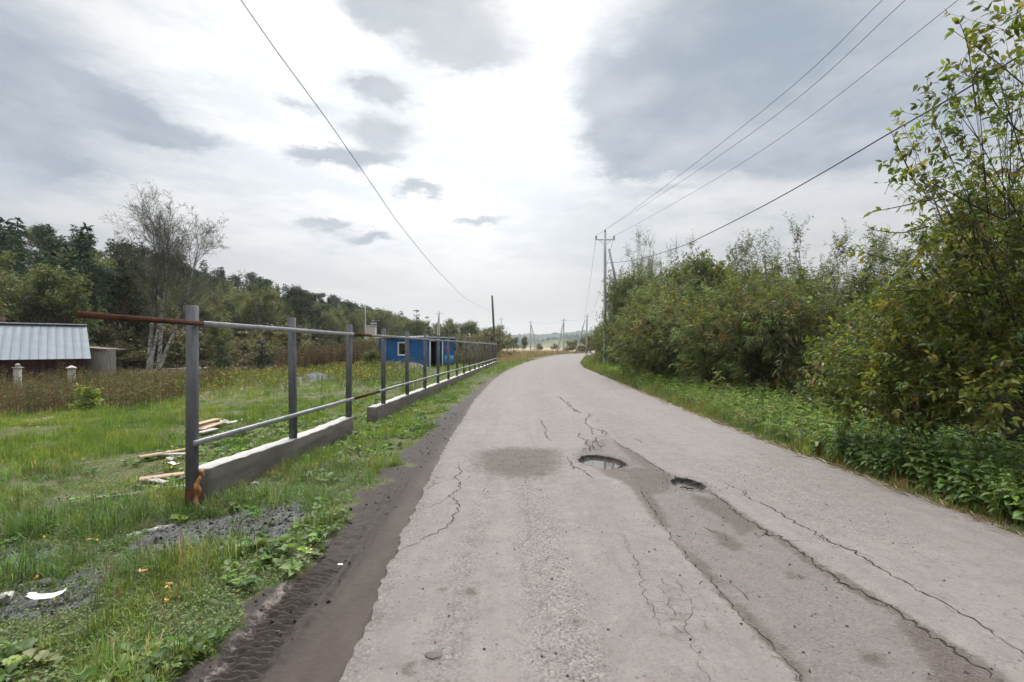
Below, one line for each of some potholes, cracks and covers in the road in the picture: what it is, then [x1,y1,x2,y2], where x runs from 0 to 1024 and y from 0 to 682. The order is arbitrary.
crack [411,463,463,546]
crack [541,398,1024,682]
pothole [671,477,707,492]
pothole [577,455,629,469]
